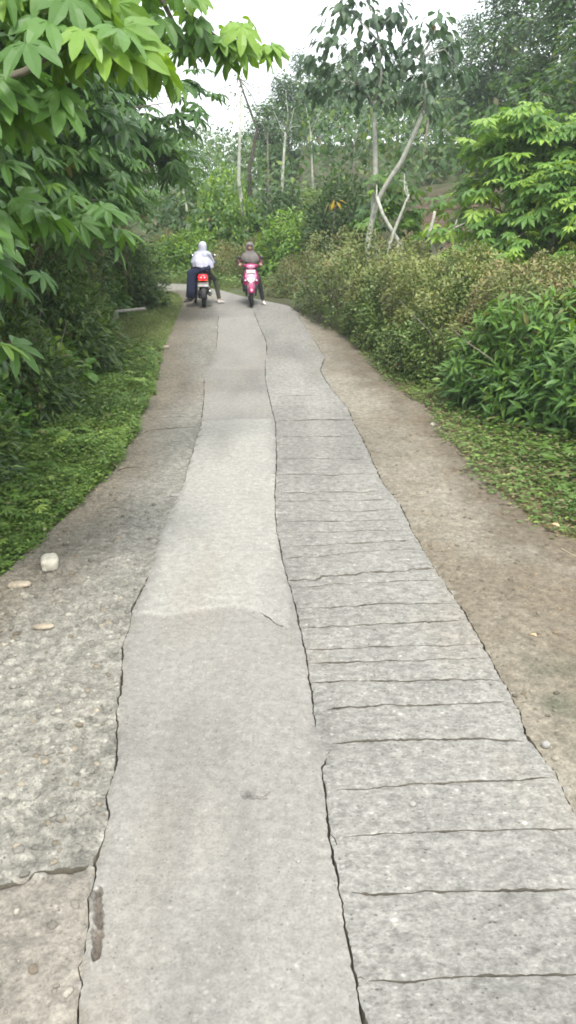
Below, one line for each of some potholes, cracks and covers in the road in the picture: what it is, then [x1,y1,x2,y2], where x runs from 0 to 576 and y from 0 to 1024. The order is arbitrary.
crack [0,576,149,1024]
crack [253,311,576,1024]
